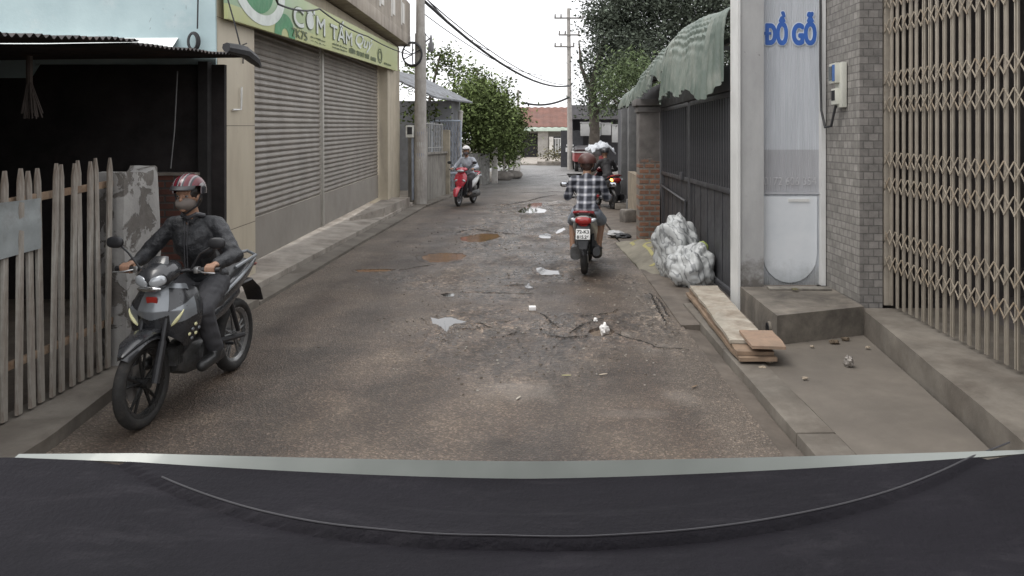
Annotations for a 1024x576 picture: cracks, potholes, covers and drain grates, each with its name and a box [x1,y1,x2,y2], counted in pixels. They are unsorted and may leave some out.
crack [457,293,689,351]
pothole [513,202,552,214]
